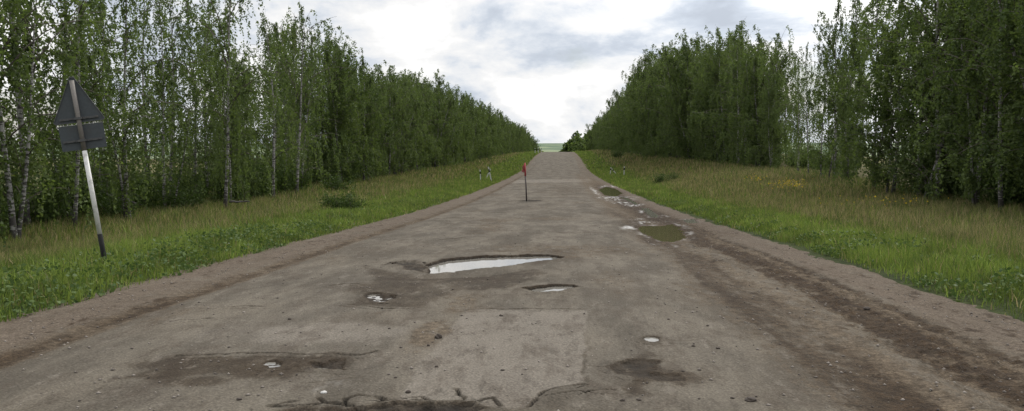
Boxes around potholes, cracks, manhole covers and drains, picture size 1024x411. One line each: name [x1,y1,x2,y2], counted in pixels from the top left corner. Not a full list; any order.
crack [162,330,632,411]
pothole [512,284,588,294]
pothole [296,356,362,375]
pothole [416,254,573,276]
pothole [355,291,405,304]
